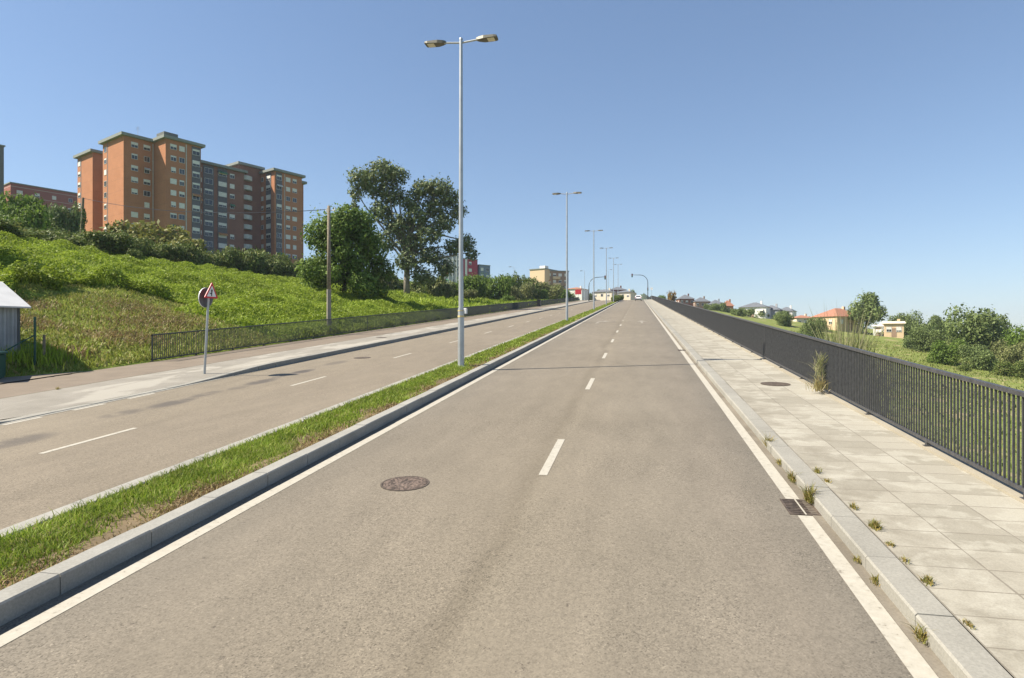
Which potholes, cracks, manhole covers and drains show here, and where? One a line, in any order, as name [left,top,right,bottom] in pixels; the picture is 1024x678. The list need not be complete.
drain grate [779,498,822,516]
manhole cover [380,476,429,491]
